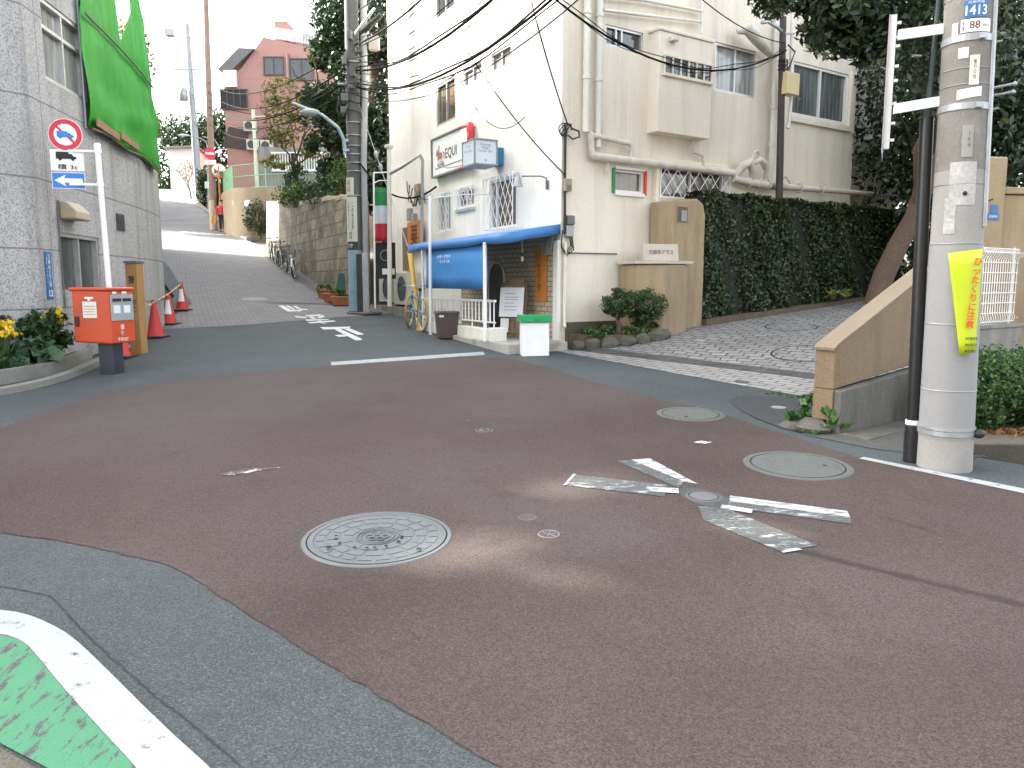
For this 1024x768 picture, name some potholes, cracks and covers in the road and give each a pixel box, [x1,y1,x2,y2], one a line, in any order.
manhole cover [656,407,725,421]
manhole cover [743,451,854,481]
manhole cover [300,512,452,568]
manhole cover [764,323,819,331]
manhole cover [537,530,560,539]
manhole cover [685,491,722,502]
manhole cover [770,345,816,362]
